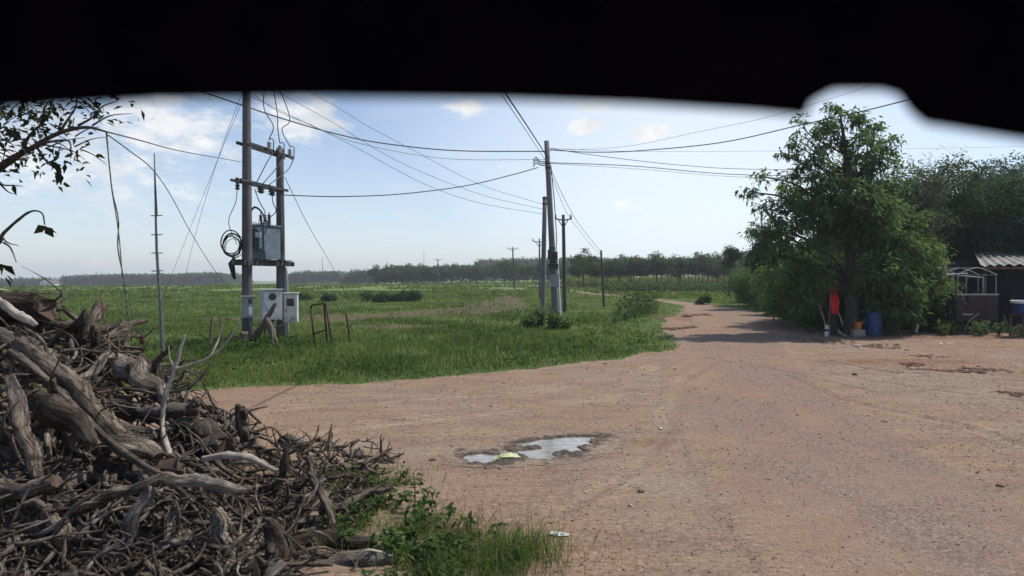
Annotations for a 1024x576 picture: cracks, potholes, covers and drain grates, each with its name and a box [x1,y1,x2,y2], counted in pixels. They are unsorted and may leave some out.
pothole [438,430,624,469]
